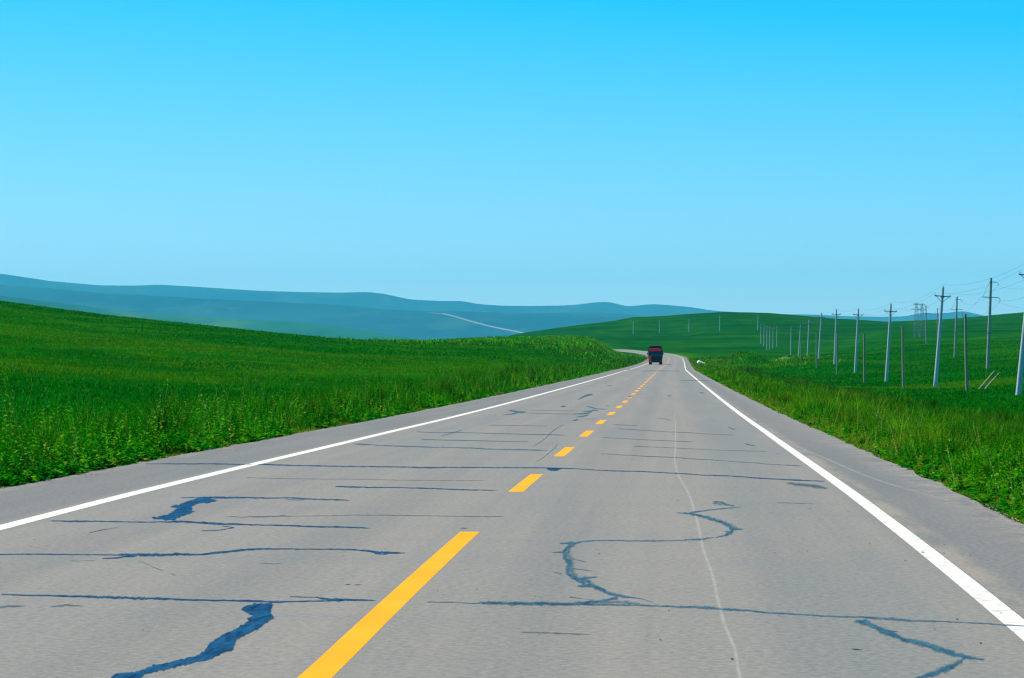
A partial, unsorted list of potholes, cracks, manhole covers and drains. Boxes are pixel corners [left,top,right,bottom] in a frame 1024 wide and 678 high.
crack [430,501,1023,678]
